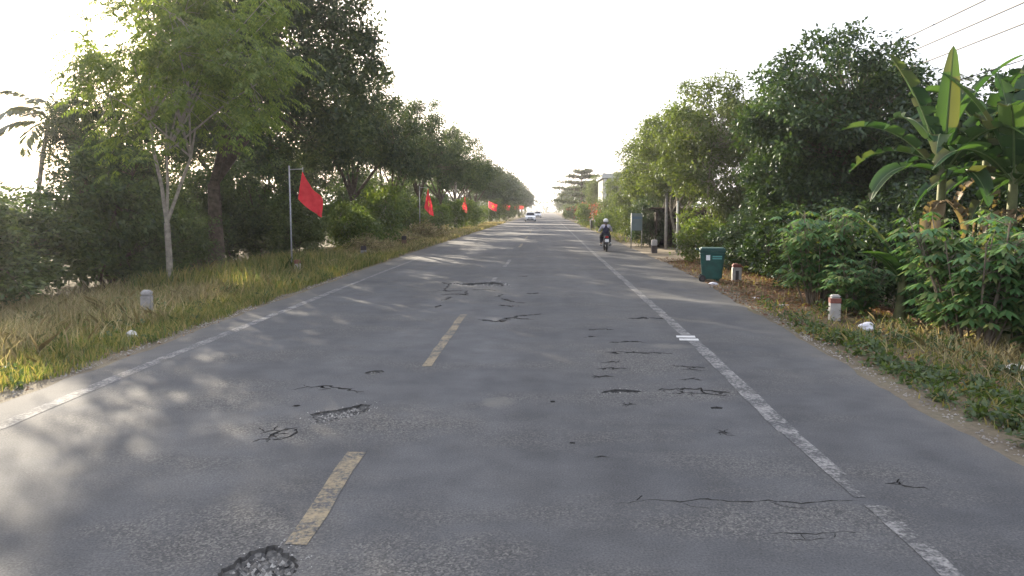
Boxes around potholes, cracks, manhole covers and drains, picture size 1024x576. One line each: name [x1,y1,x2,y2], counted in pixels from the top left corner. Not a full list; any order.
crack [435,283,539,322]
crack [253,426,298,442]
crack [770,531,866,540]
pothole [298,400,381,425]
crack [616,495,853,508]
pothole [213,527,312,576]
crack [585,329,730,396]
crack [885,479,930,490]
crack [294,385,364,394]
